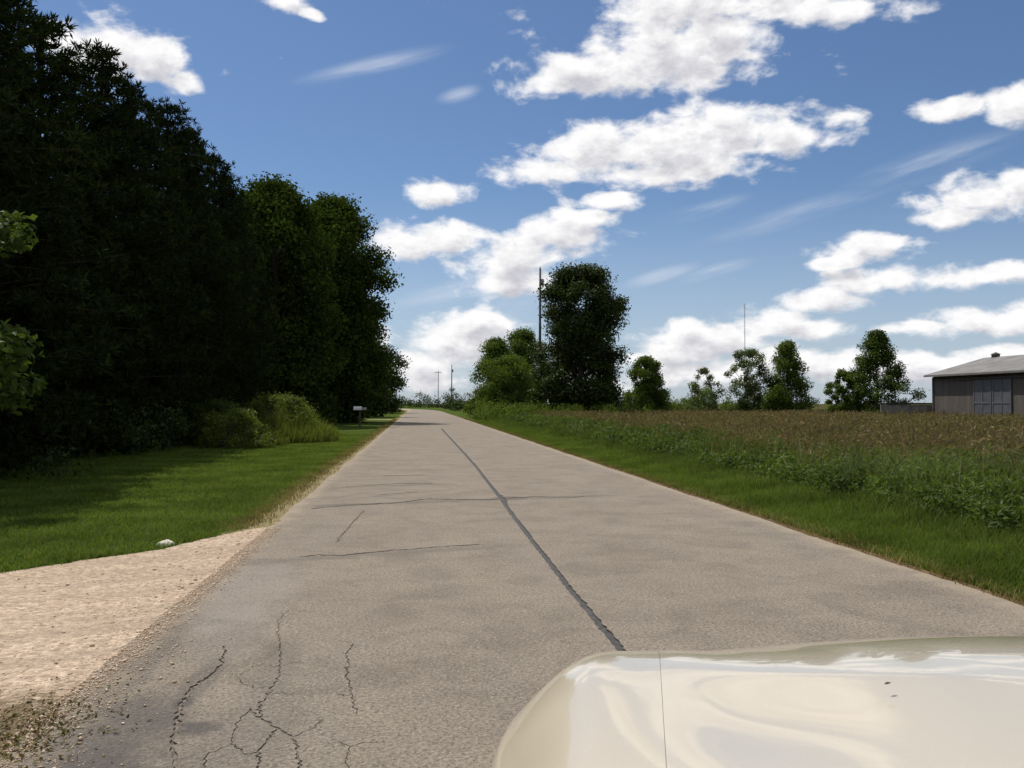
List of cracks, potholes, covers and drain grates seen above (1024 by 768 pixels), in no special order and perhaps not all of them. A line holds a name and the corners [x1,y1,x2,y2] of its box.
crack [169,610,378,768]
crack [301,429,627,651]
